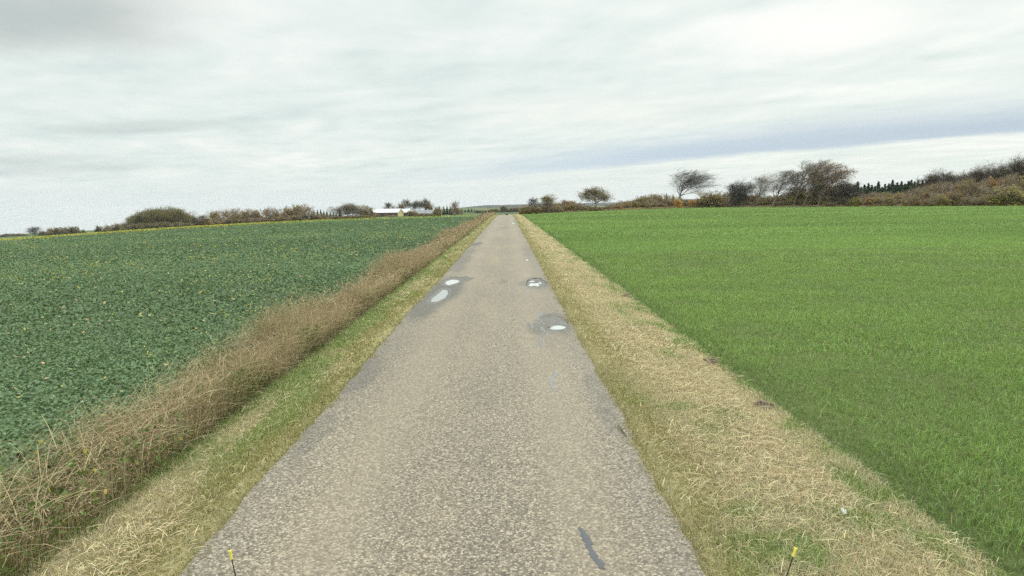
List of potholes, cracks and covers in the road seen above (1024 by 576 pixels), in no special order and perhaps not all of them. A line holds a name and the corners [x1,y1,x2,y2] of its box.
pothole [541,316,569,332]
pothole [441,277,465,286]
pothole [525,278,547,287]
pothole [426,287,453,304]
